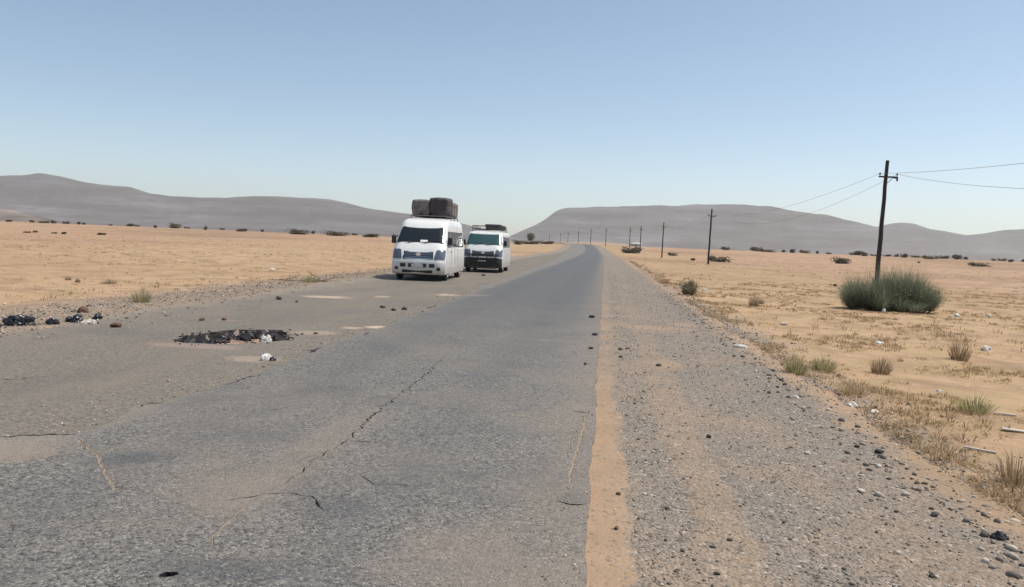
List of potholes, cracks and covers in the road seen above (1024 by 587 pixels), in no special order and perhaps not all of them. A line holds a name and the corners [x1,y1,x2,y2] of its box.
crack [558,411,591,506]
crack [0,305,436,495]
pothole [172,328,304,346]
crack [210,359,442,548]
